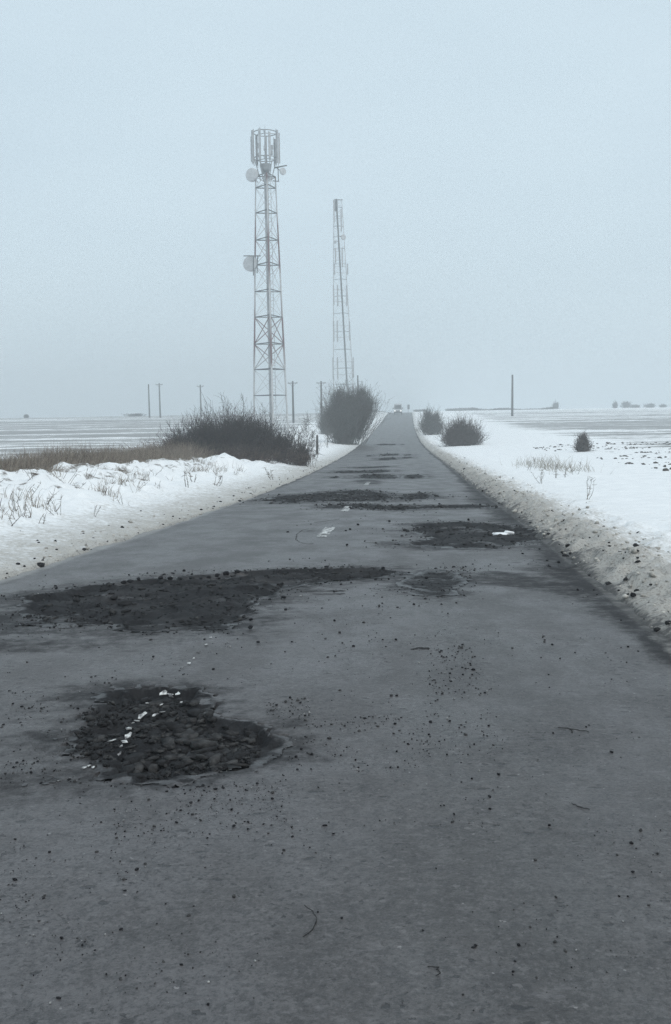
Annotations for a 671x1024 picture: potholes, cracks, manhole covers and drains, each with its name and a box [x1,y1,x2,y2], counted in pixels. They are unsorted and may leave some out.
pothole [257,490,404,503]
pothole [22,684,295,788]
pothole [16,566,401,633]
pothole [389,521,549,549]
